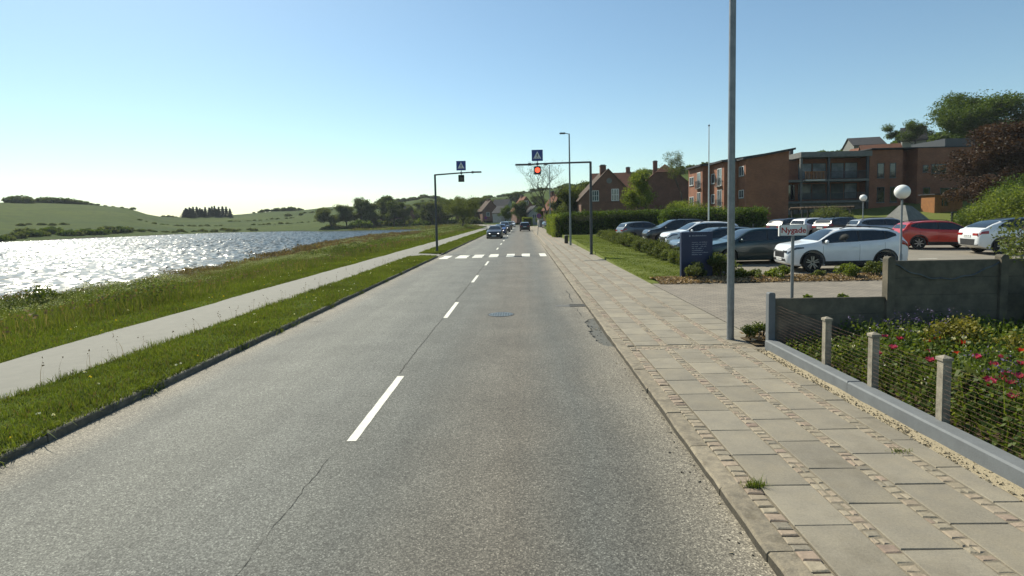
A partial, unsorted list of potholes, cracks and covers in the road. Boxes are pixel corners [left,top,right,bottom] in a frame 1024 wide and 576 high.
pothole [585,318,614,347]
crack [235,454,334,576]
